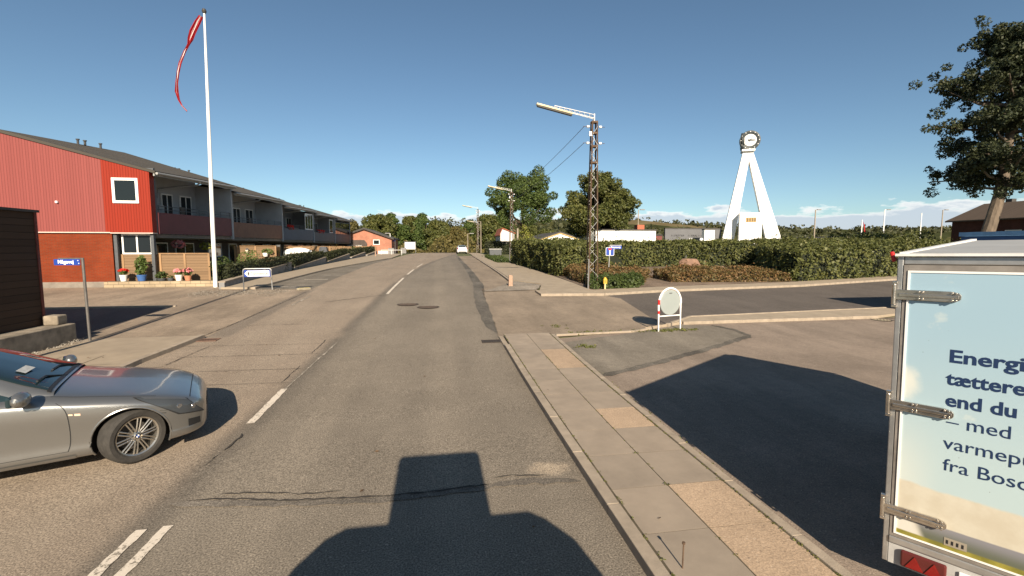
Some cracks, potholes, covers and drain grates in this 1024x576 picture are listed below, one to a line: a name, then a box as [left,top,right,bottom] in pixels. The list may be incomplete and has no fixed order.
crack [170,433,581,507]
crack [166,340,325,385]
